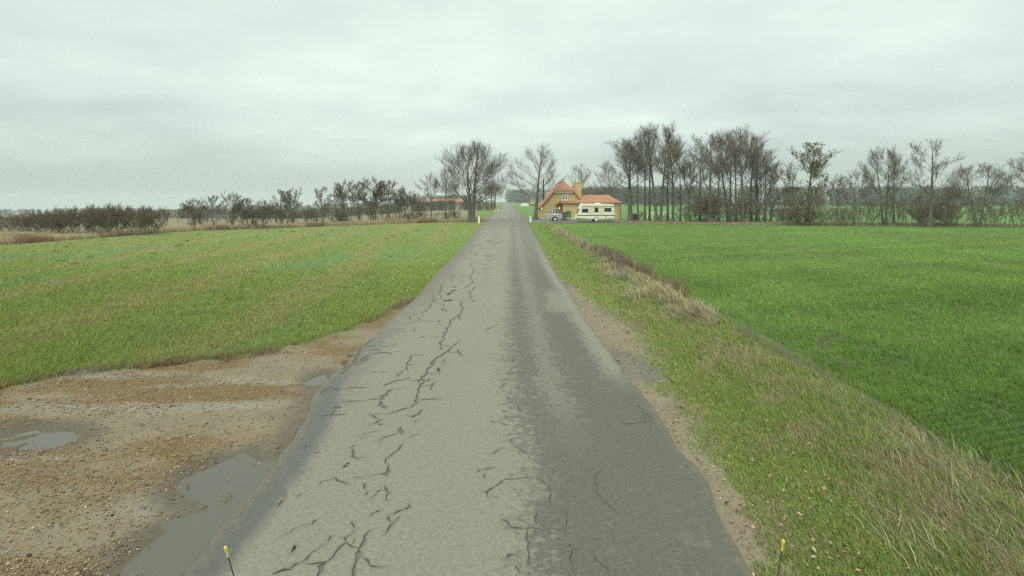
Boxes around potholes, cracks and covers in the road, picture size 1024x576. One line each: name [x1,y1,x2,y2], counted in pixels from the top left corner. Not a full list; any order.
crack [478,360,576,576]
crack [622,405,652,431]
crack [290,263,476,576]
